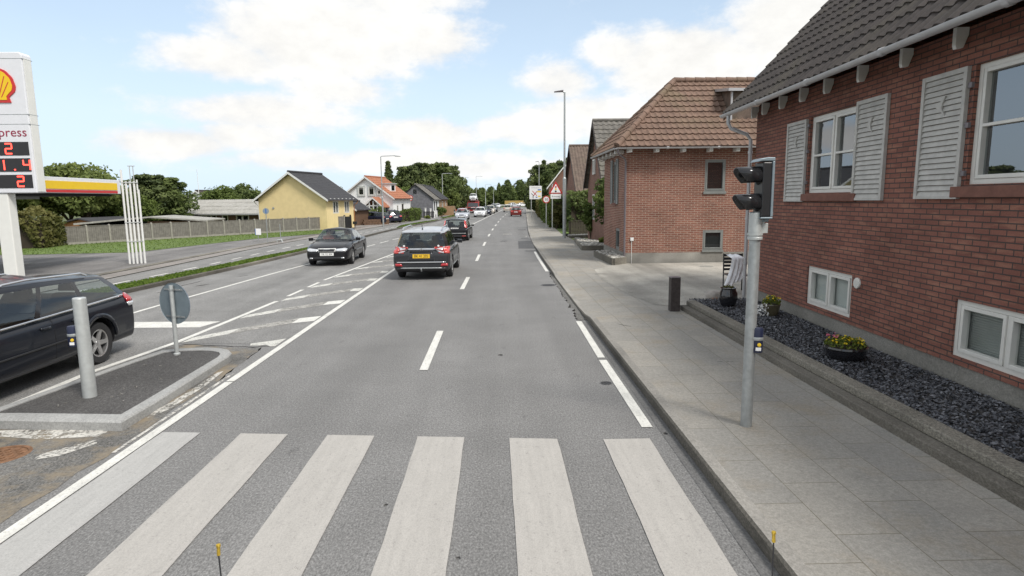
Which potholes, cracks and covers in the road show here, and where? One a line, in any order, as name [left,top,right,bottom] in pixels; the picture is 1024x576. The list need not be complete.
manhole cover [0,445,33,463]
